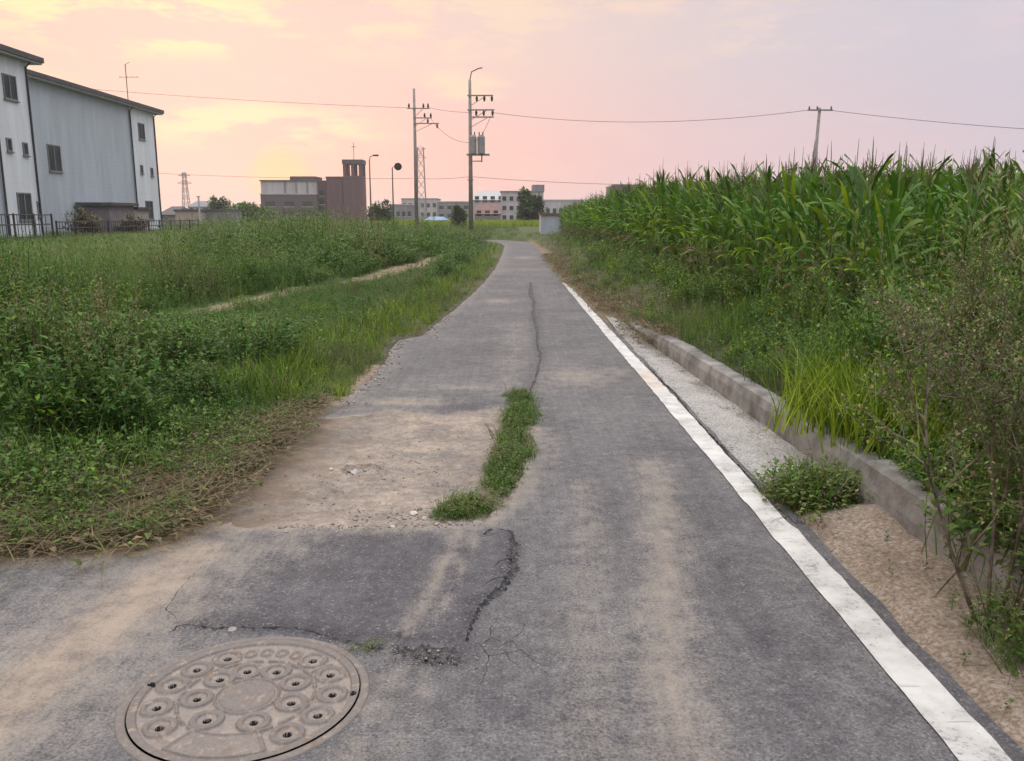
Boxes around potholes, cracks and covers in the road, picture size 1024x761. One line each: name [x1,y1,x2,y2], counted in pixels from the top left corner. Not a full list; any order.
manhole cover [114,636,370,761]
crack [465,528,560,685]
crack [528,283,543,395]
pothole [390,644,467,667]
